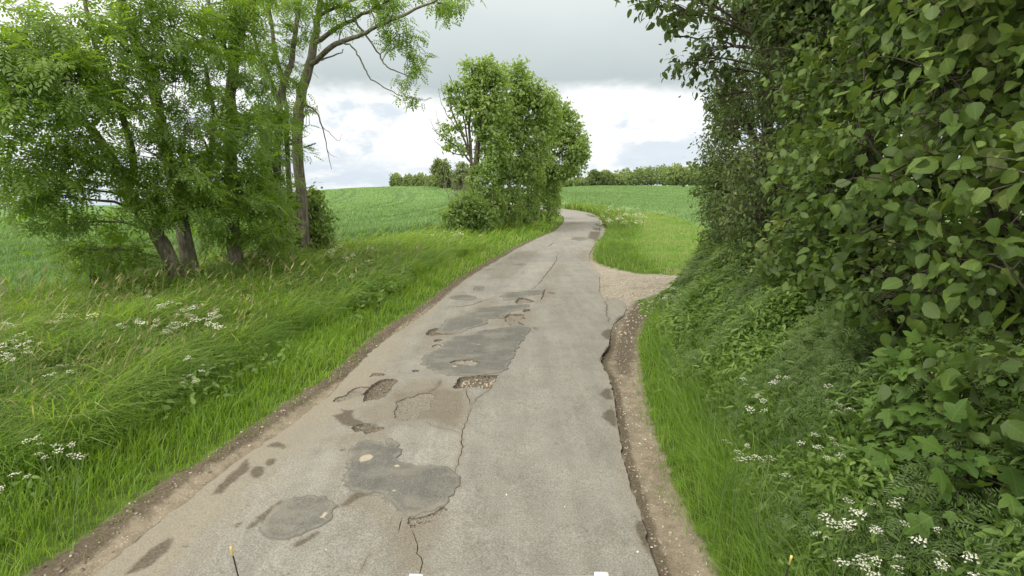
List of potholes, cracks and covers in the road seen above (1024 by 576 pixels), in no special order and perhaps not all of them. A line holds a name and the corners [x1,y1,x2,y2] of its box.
pothole [504,314,526,325]
pothole [453,375,498,389]
crack [391,519,423,574]
pothole [363,379,398,402]
crack [429,390,489,471]
